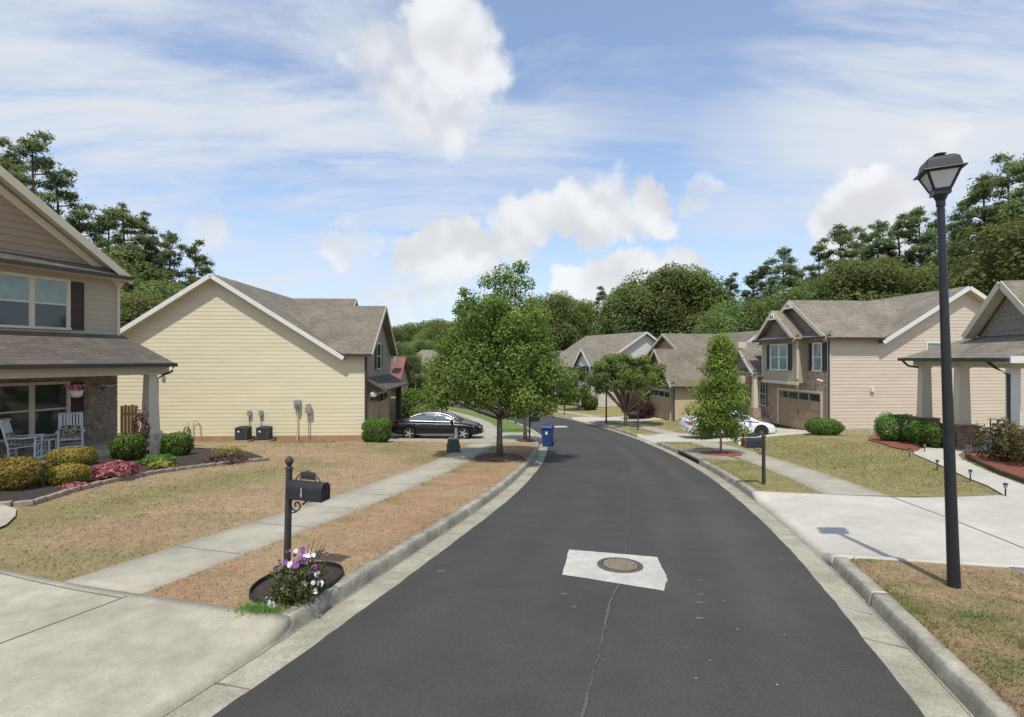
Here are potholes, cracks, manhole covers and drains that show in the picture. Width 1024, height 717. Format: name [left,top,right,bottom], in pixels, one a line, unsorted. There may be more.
manhole cover [597,557,644,573]
crack [580,584,621,717]
crack [617,470,630,552]
